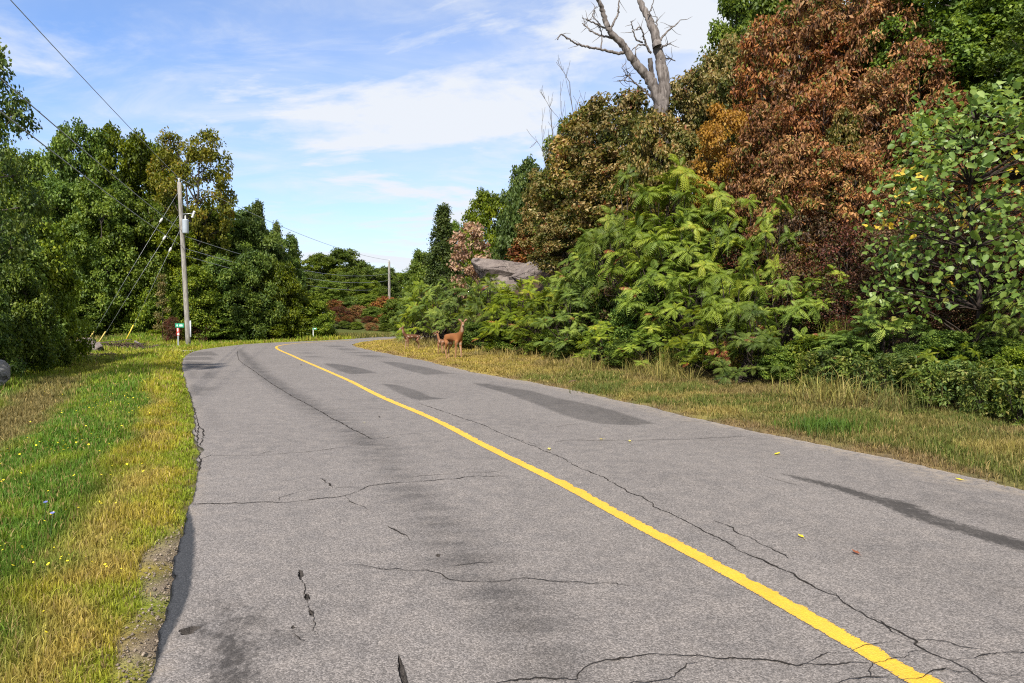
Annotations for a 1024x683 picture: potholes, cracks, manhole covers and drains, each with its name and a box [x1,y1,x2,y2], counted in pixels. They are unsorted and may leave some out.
crack [422,404,1024,683]
crack [194,409,333,470]
crack [294,579,319,641]
crack [352,562,624,585]
crack [184,470,500,508]
